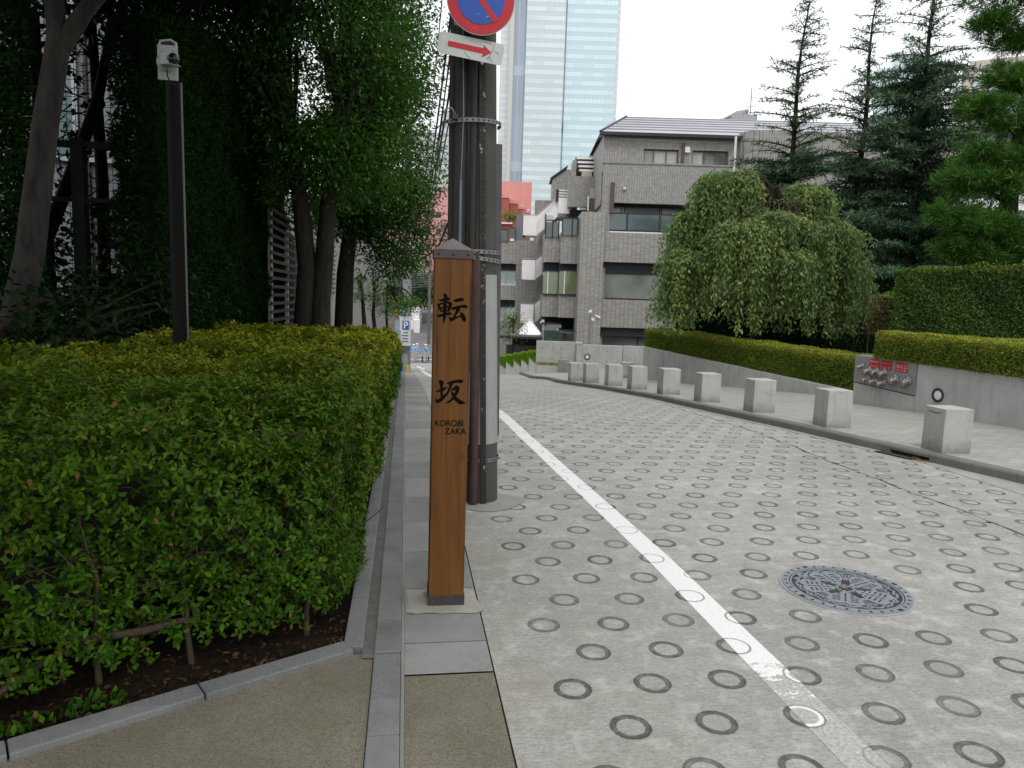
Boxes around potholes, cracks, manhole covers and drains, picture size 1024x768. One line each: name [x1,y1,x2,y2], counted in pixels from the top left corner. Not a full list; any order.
drain grate [875,449,929,462]
manhole cover [779,565,917,617]
crack [654,401,1024,536]
